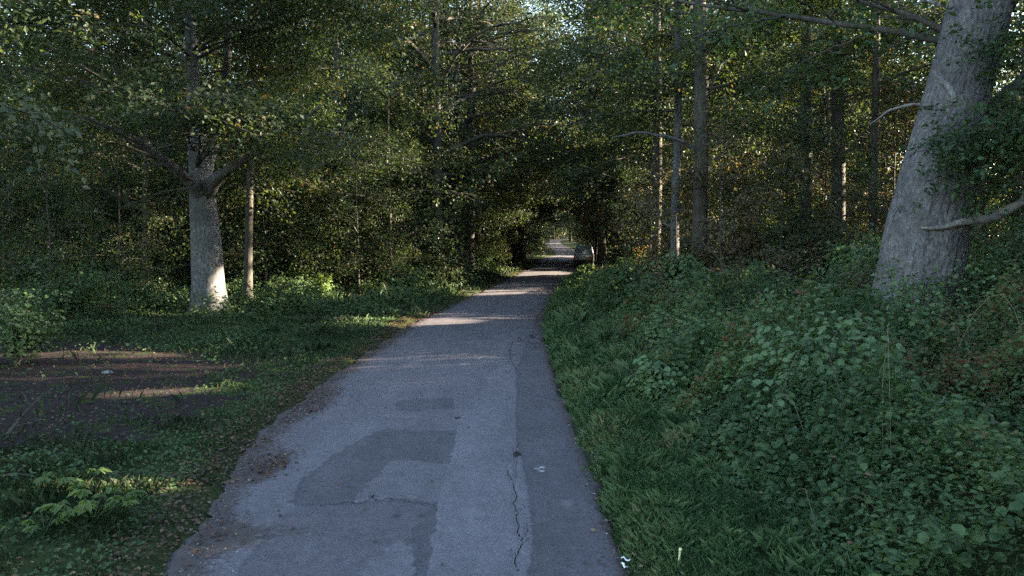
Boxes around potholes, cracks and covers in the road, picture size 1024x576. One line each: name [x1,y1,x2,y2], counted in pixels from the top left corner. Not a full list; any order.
crack [506,438,534,571]
